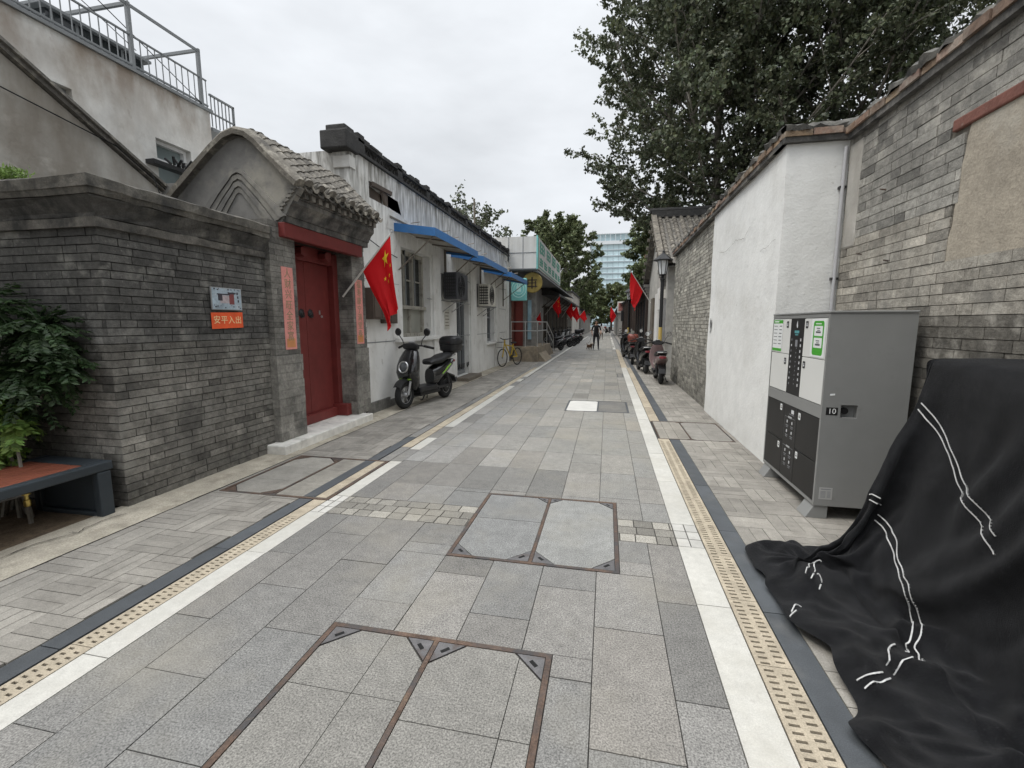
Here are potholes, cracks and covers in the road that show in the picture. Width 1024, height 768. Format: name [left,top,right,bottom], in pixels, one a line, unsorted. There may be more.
manhole cover [202,622,552,768]
drain grate [170,545,252,588]
drain grate [728,599,793,670]
manhole cover [651,421,735,442]
drain grate [72,586,187,649]
manhole cover [219,455,389,501]
drain grate [238,516,299,547]
manhole cover [564,400,629,413]
drain grate [0,644,91,706]
drain grate [684,498,714,524]
drain grate [659,441,676,452]
manhole cover [446,493,620,574]
